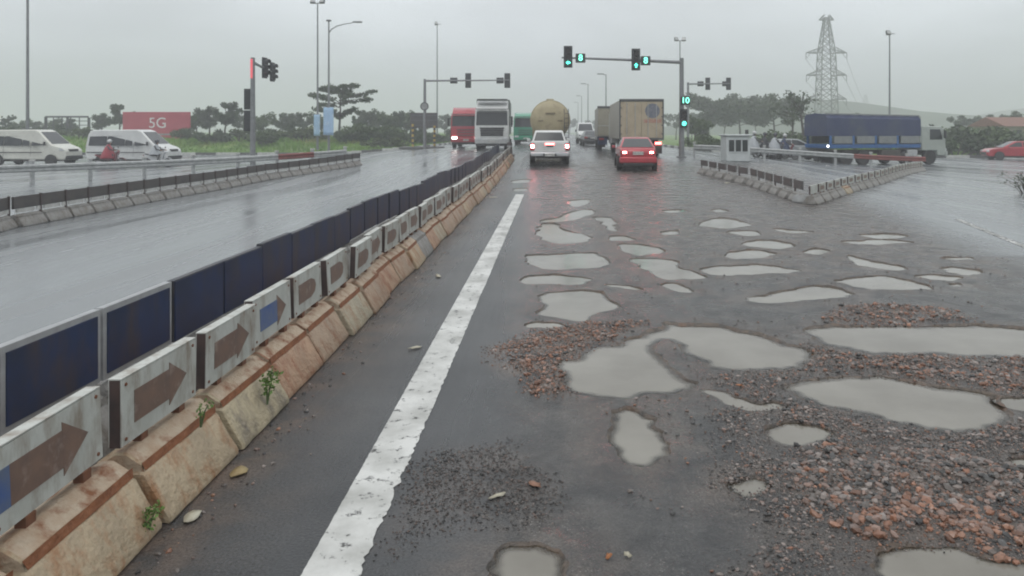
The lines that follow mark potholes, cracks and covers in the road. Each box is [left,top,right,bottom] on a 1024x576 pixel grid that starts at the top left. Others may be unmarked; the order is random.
pothole [763,419,837,446]
pothole [725,475,774,497]
pothole [699,217,751,228]
pothole [607,405,671,467]
pothole [803,323,1024,357]
pothole [746,285,855,303]
pothole [486,541,570,576]
pothole [777,374,1015,434]
pothole [535,222,593,244]
pothole [834,275,934,290]
pothole [524,252,611,270]
pothole [629,258,707,280]
